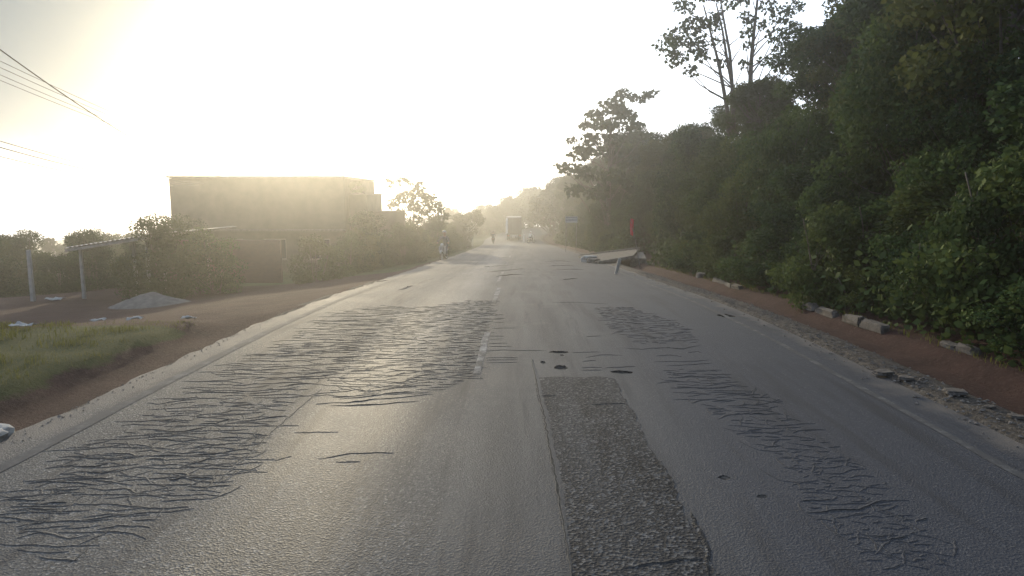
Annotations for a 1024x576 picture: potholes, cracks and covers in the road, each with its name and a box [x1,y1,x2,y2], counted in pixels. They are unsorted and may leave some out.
crack [572,302,958,570]
crack [0,280,546,562]
